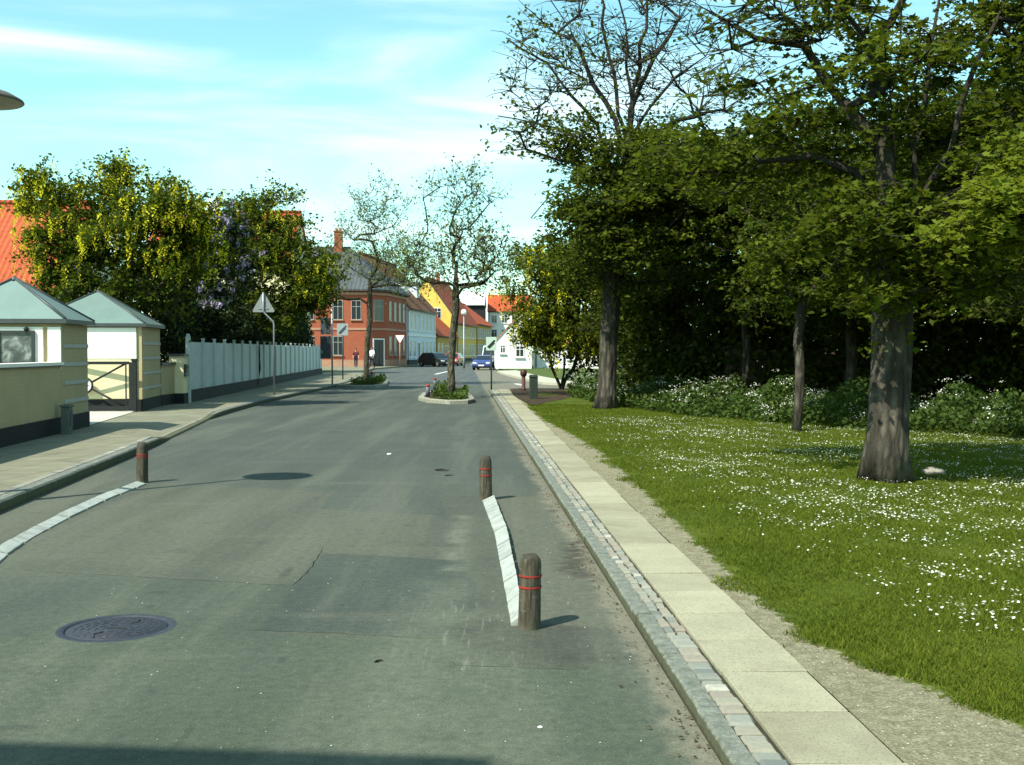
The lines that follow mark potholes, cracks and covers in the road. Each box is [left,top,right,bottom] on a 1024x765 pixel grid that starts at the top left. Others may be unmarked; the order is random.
manhole cover [55,614,177,642]
crack [15,547,324,585]
